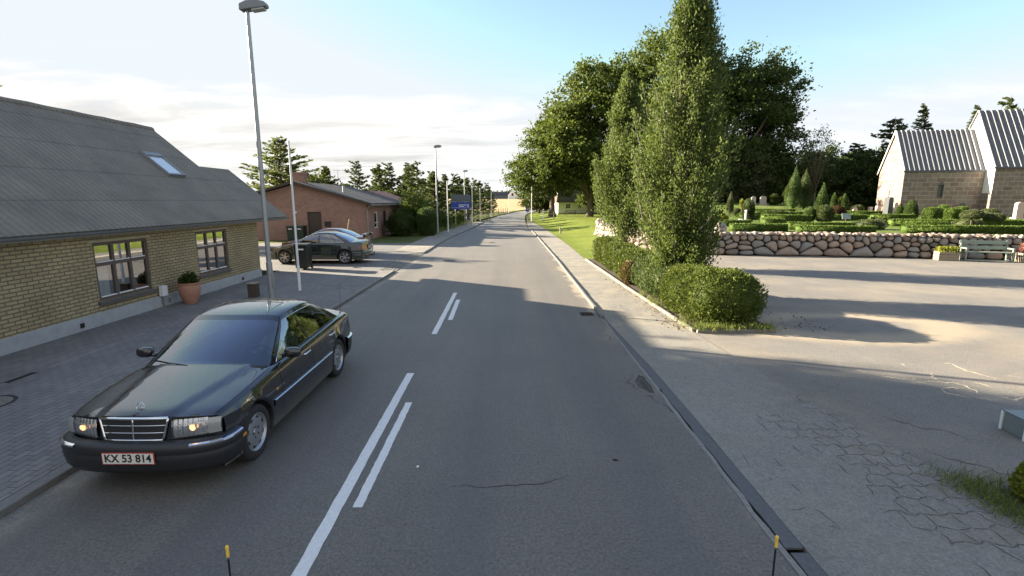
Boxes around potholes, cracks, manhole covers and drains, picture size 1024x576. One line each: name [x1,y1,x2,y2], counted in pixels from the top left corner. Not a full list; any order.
crack [855,363,1023,401]
manhole cover [0,395,18,407]
pothole [635,375,654,393]
crack [757,395,1024,576]
